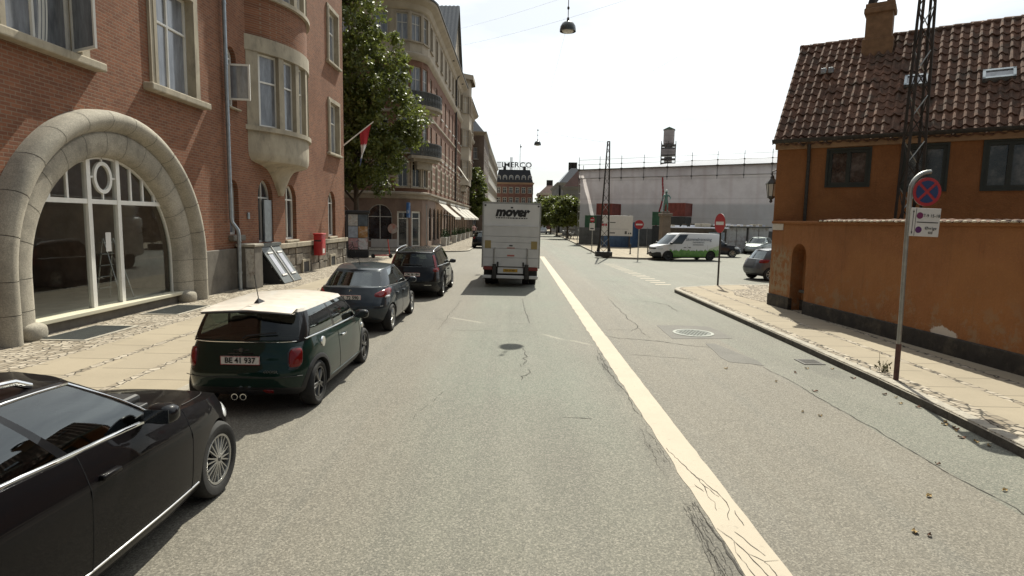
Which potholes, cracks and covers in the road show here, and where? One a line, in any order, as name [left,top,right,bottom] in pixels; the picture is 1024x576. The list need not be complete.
manhole cover [672,329,714,337]
crack [597,300,777,576]
